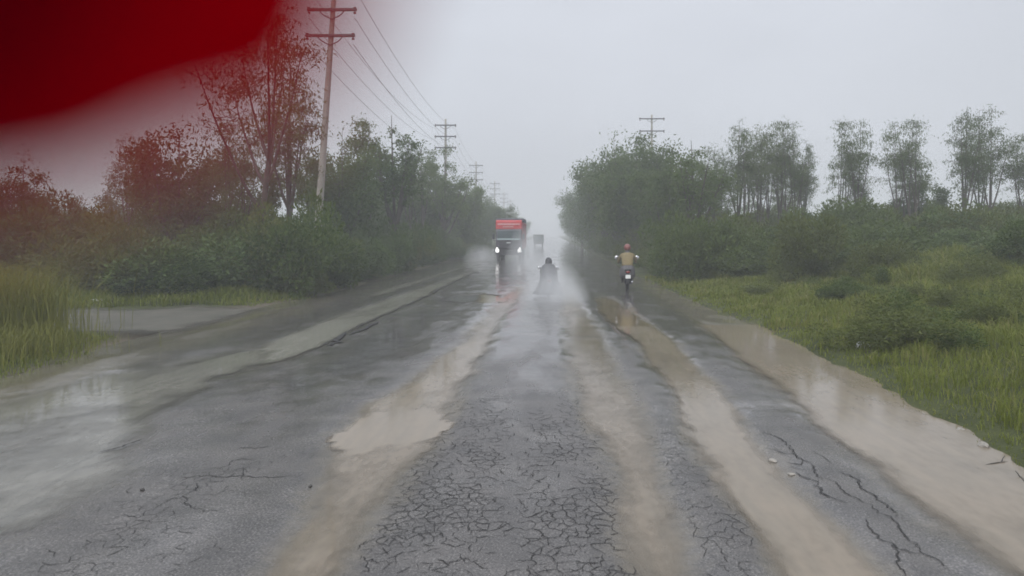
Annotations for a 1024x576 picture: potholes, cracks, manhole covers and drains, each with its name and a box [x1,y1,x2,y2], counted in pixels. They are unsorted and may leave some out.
crack [760,431,945,576]
crack [647,431,768,576]
crack [31,434,327,576]
crack [343,396,636,576]
